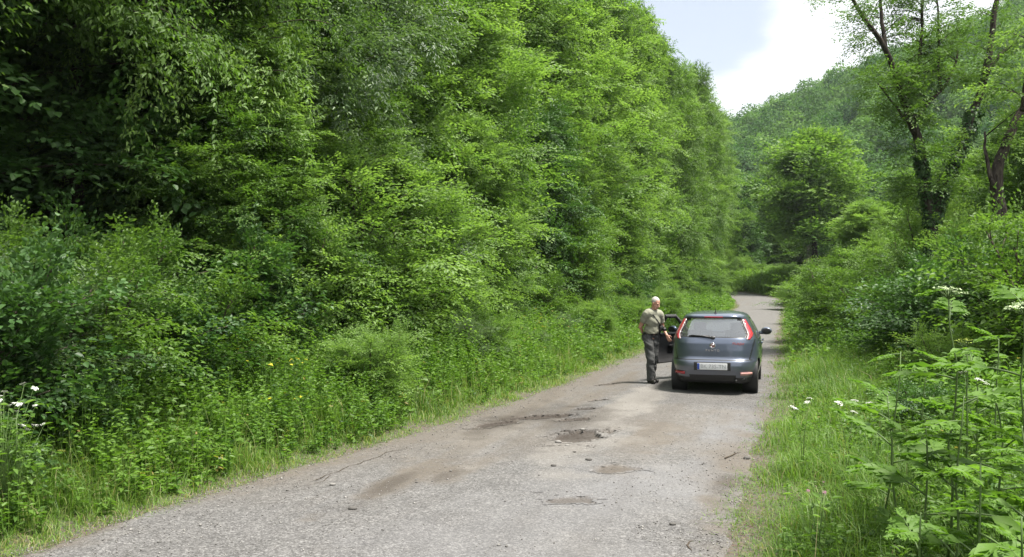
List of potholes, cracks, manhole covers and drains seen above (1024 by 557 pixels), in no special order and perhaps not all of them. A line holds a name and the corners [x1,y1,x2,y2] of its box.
pothole [464,420,523,429]
pothole [534,491,608,505]
pothole [589,461,654,474]
pothole [501,412,583,421]
